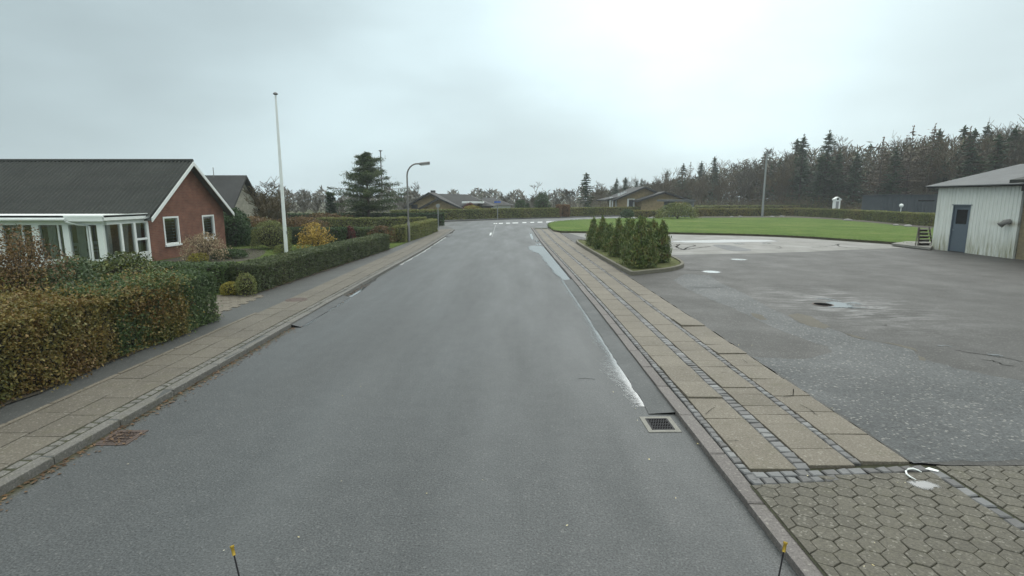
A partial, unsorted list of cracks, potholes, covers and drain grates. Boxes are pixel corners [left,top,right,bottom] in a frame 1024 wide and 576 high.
drain grate [93,430,149,446]
drain grate [639,416,682,433]
